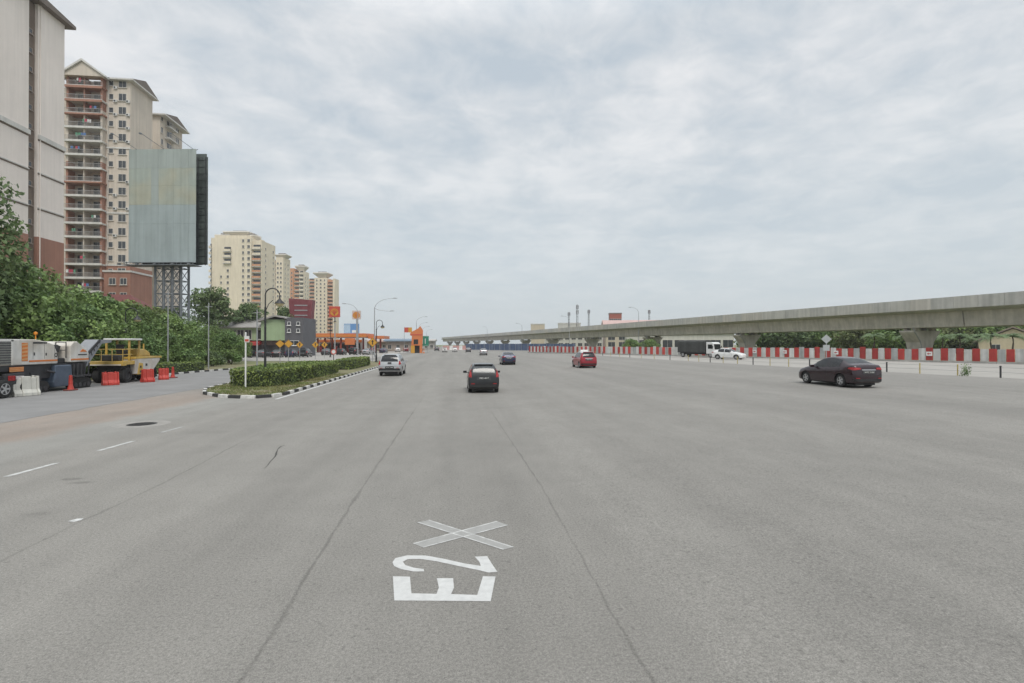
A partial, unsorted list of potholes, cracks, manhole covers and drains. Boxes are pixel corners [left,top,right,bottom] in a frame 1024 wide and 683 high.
manhole cover [111,420,171,428]
